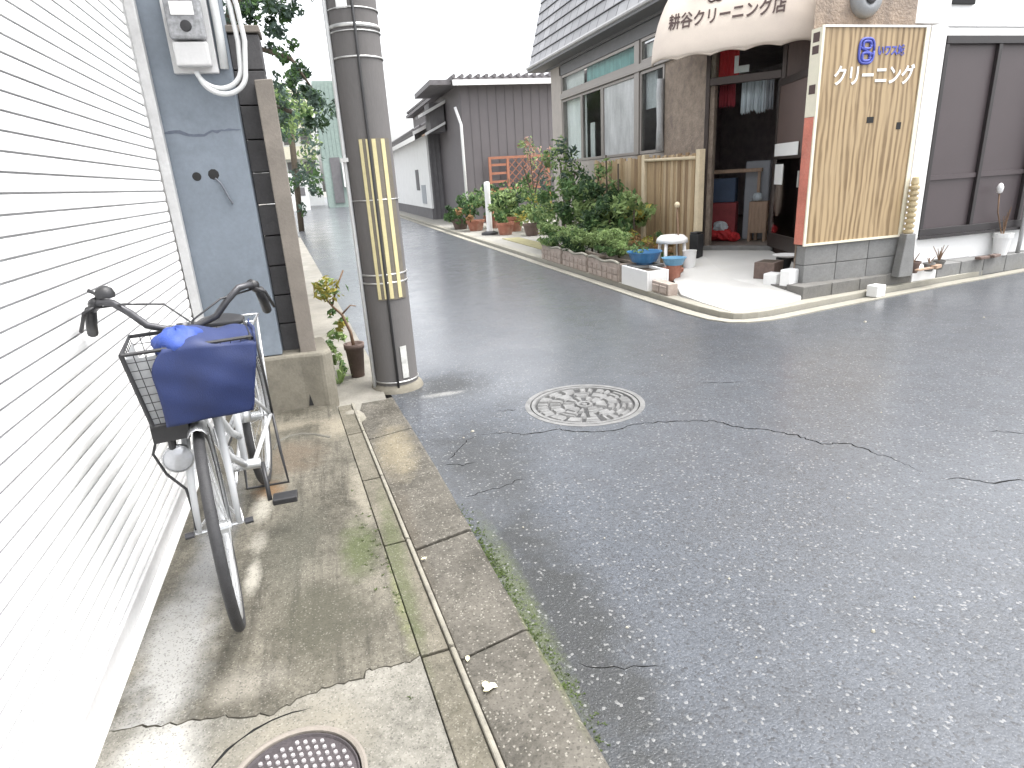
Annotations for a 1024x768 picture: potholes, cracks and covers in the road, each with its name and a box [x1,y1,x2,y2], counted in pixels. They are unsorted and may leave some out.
crack [577,662,664,670]
crack [447,420,924,476]
crack [112,655,421,768]
manhole cover [525,384,645,427]
